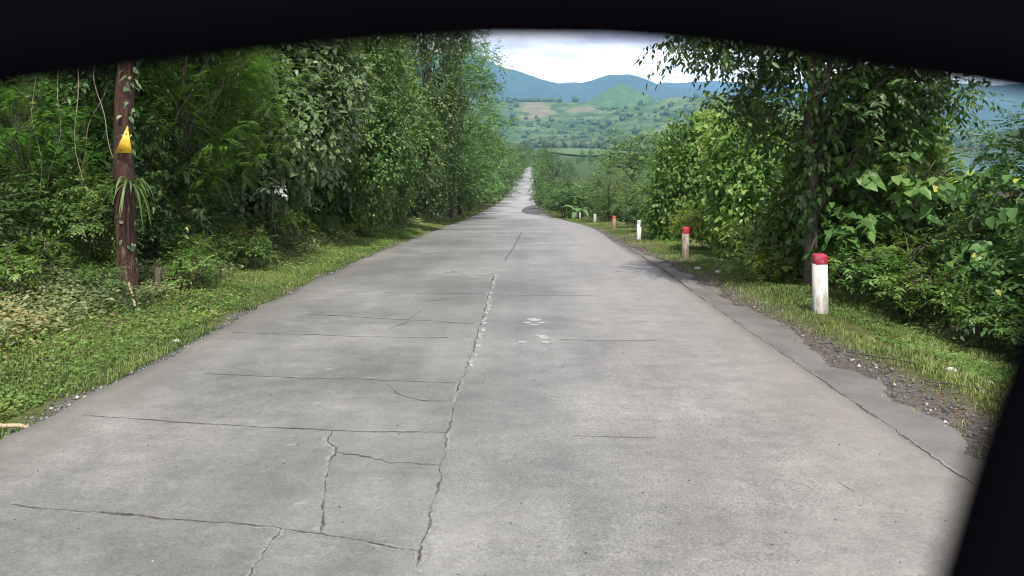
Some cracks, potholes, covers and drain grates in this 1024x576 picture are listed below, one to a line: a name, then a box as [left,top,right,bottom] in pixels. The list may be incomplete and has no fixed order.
crack [232,293,476,338]
crack [10,415,448,576]
crack [204,373,451,401]
